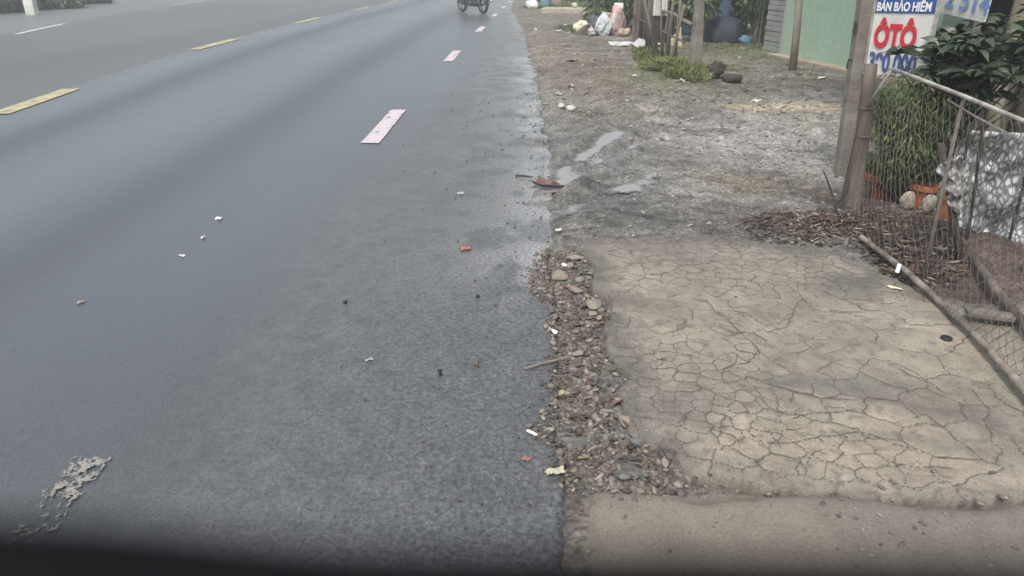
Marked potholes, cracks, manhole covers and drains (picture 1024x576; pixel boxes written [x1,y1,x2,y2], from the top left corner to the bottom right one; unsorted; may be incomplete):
crack [591,236,1024,500]
